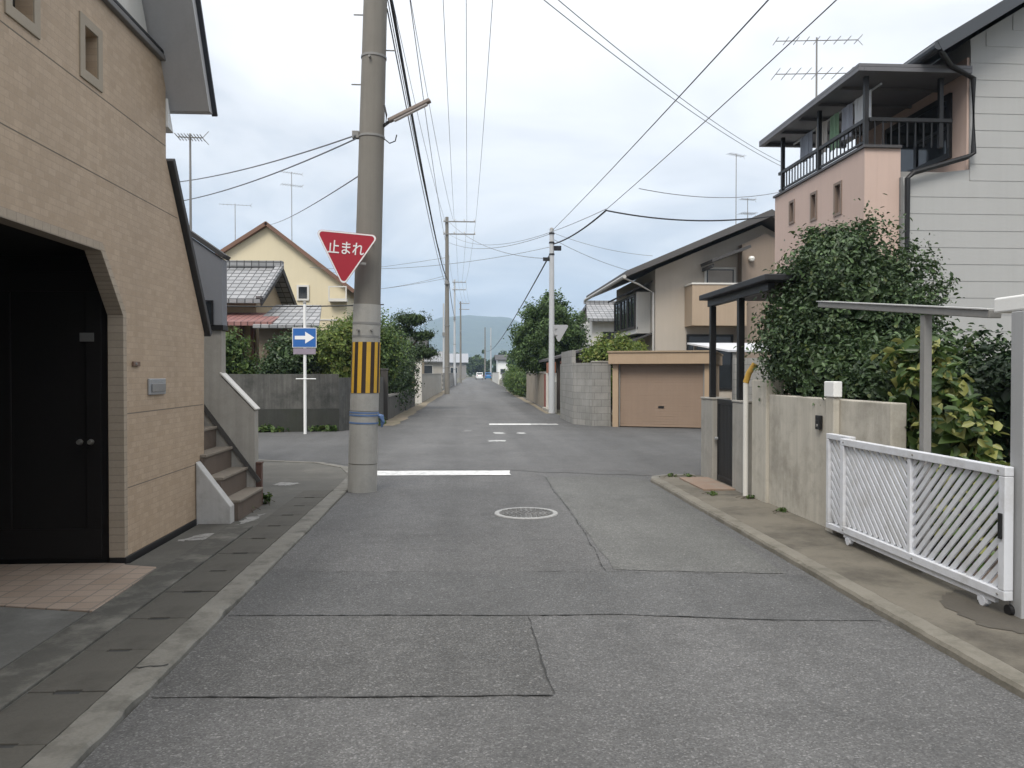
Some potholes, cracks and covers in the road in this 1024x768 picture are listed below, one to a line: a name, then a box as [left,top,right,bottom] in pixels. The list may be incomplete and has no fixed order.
manhole cover [494,507,558,519]
